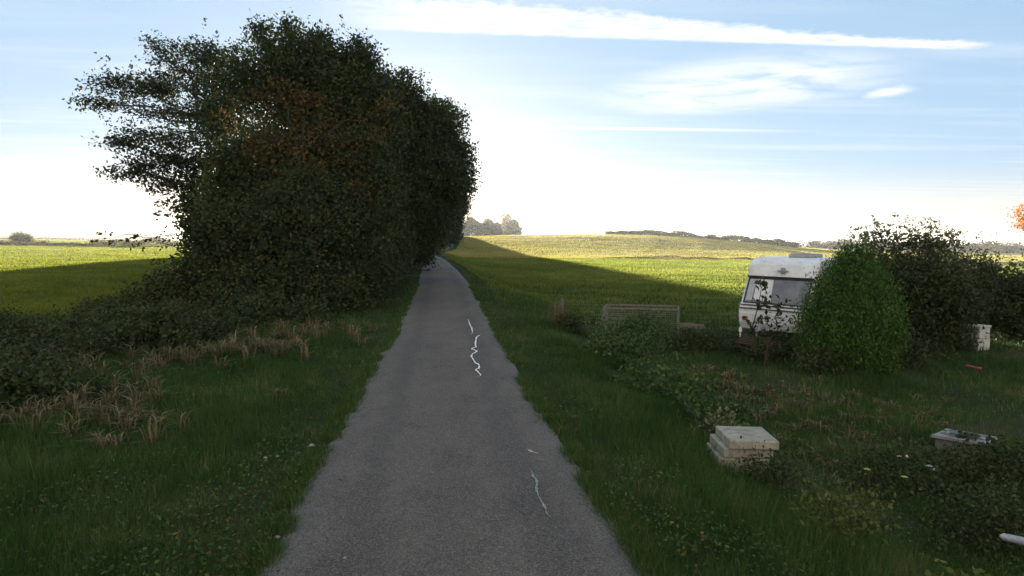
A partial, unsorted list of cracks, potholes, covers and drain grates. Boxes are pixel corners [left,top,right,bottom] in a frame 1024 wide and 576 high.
crack [527,449,550,518]
crack [468,319,483,377]
